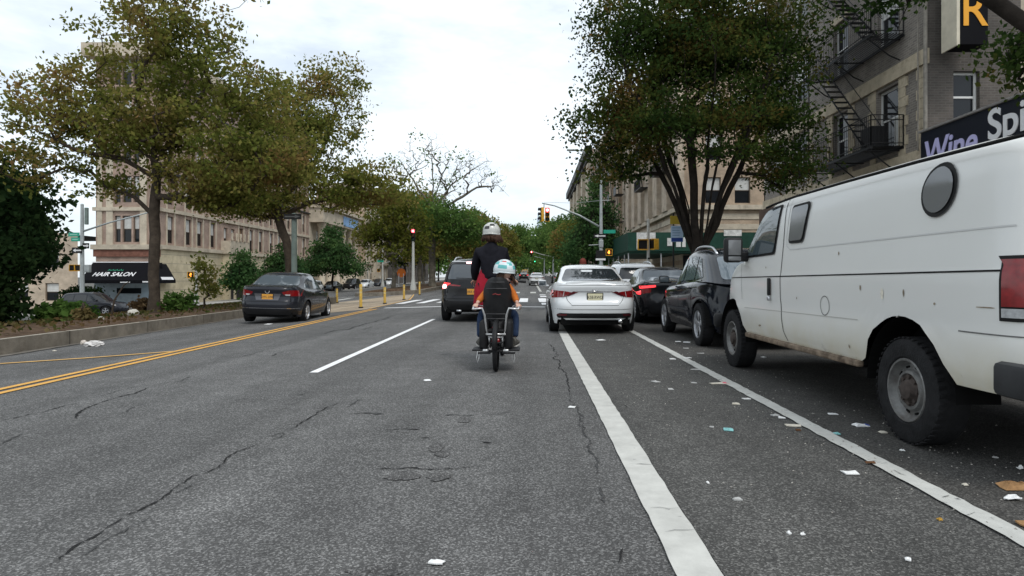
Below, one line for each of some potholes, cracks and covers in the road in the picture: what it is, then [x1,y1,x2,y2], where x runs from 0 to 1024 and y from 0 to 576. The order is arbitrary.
crack [275,399,429,438]
crack [27,445,254,574]
crack [569,397,605,503]
crack [3,386,146,443]
